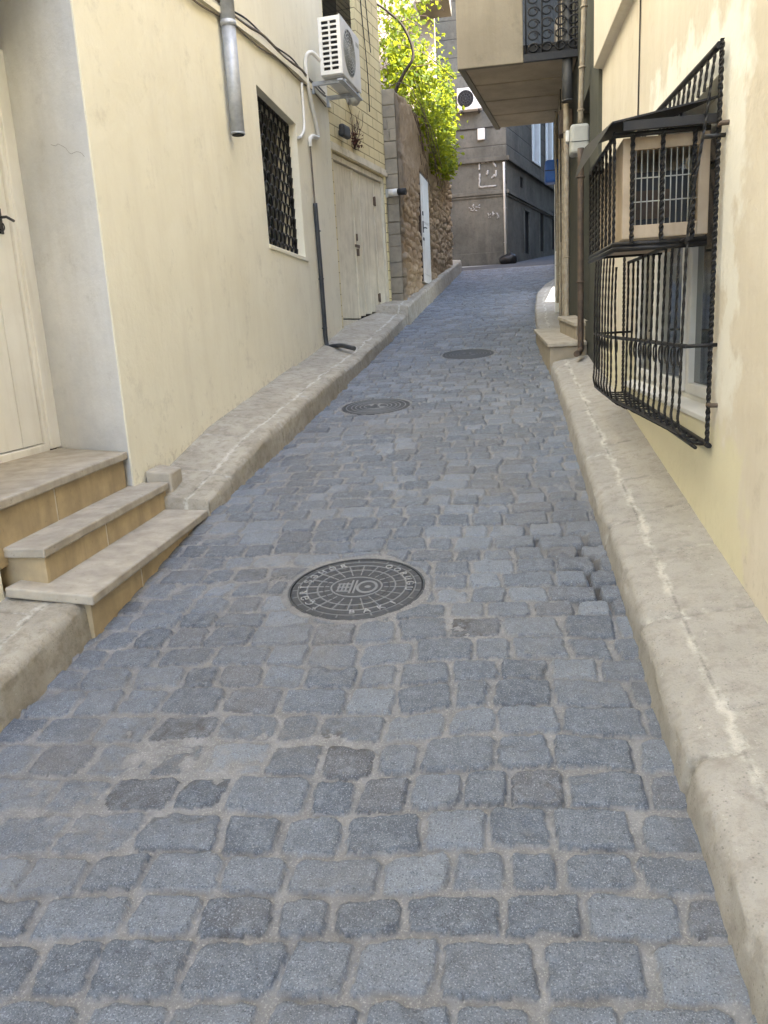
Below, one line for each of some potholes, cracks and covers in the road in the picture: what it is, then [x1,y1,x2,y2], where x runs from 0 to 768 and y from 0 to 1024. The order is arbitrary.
manhole cover [288,558,425,620]
manhole cover [342,399,410,415]
manhole cover [442,349,494,359]
